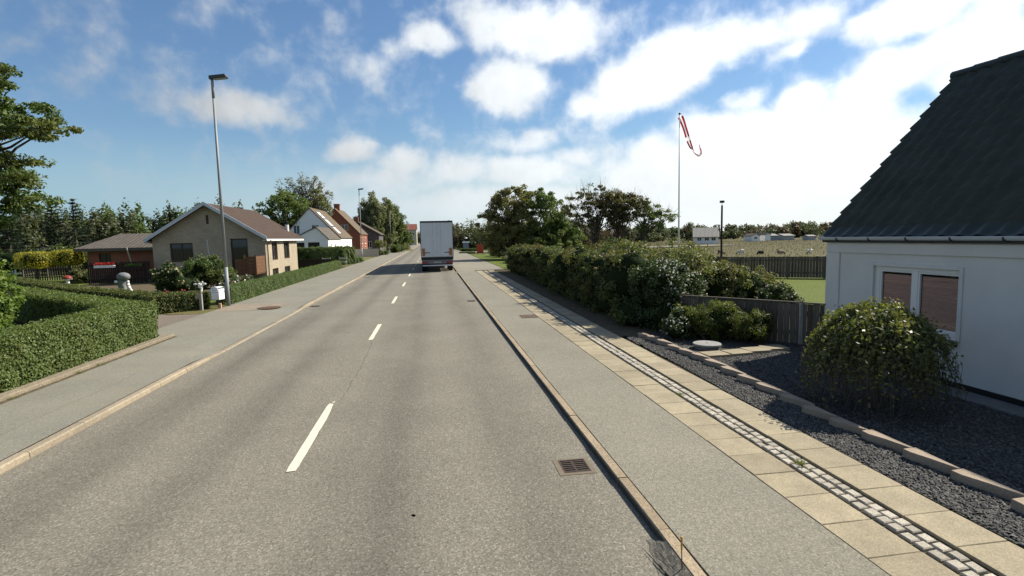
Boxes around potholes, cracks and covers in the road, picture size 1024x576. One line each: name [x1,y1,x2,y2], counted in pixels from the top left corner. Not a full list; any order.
drain grate [558,458,592,473]
